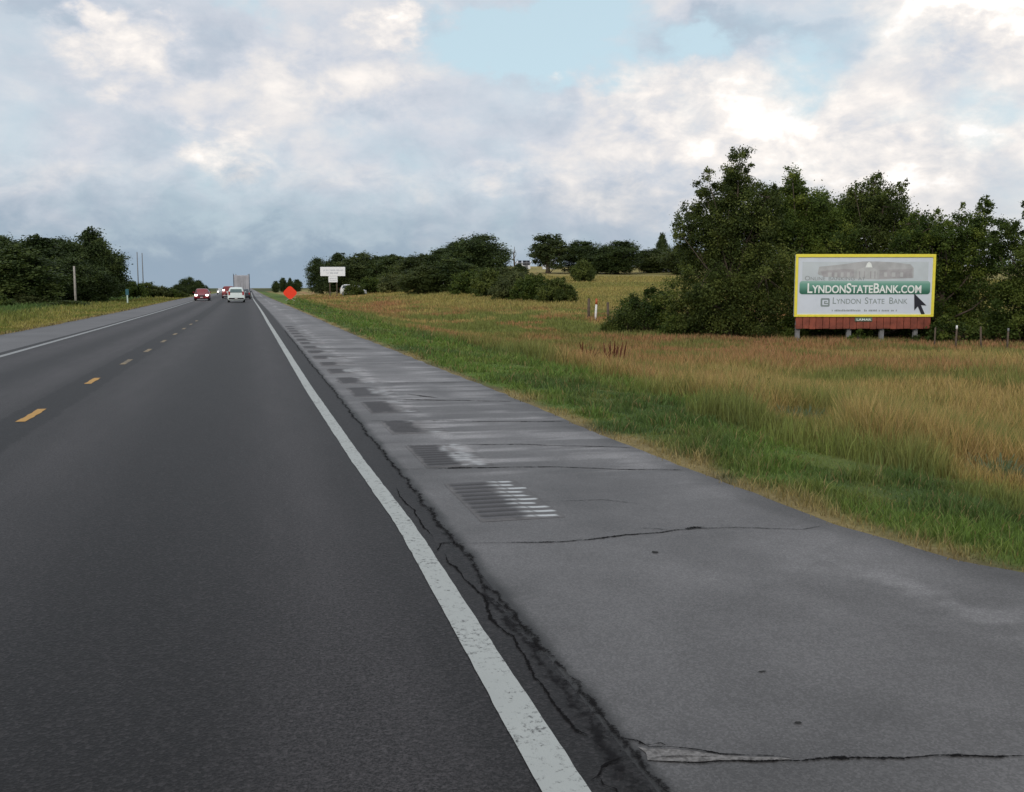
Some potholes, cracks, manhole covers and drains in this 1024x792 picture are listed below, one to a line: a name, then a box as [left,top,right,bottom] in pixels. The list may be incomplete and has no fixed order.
crack [398,491,1024,792]
